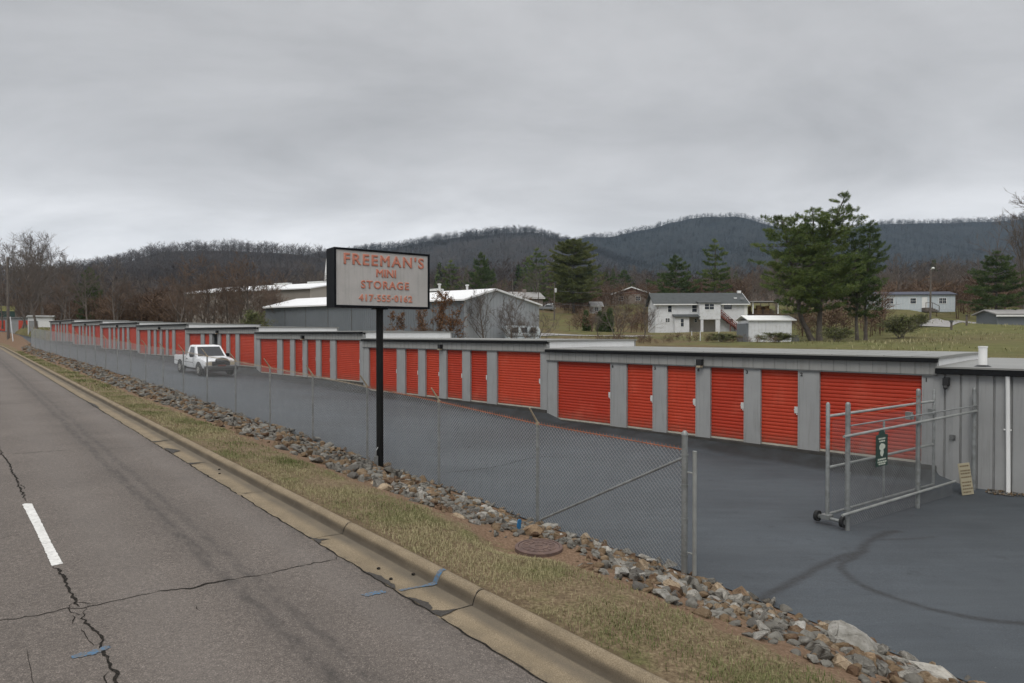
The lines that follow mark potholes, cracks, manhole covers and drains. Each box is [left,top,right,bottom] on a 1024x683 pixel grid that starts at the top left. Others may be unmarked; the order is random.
manhole cover [515,538,563,558]
crack [0,447,131,501]
crack [2,557,337,683]
